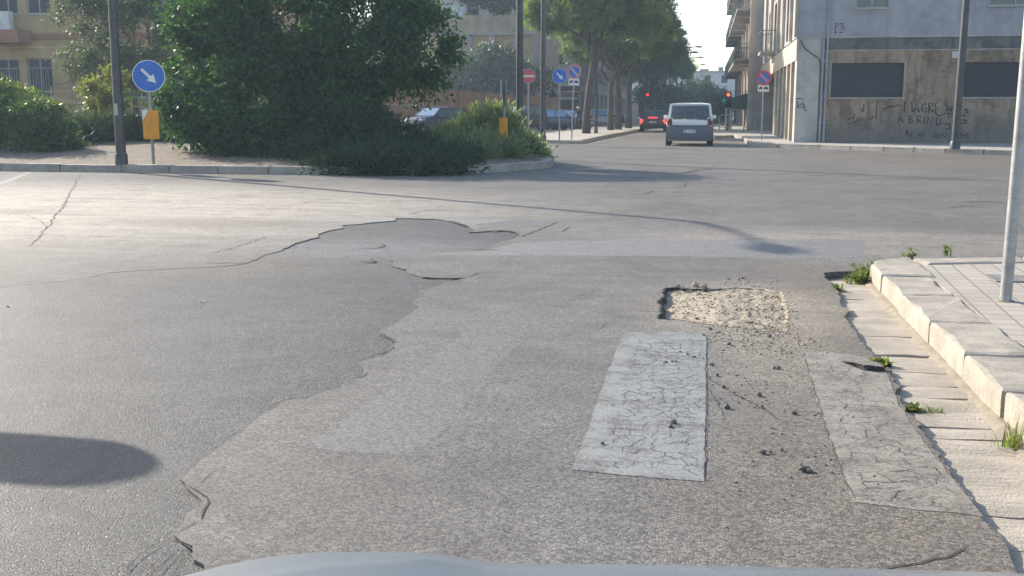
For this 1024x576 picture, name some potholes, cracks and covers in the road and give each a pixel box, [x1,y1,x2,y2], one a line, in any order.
crack [18,175,80,246]
pothole [656,287,790,333]
crack [592,337,781,475]
crack [828,362,957,505]
crack [882,544,967,569]
